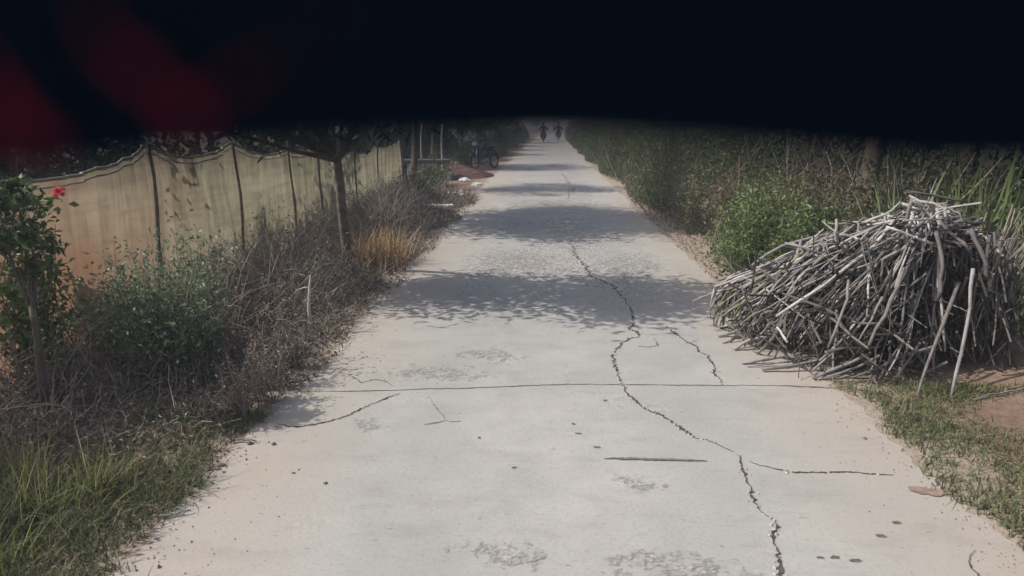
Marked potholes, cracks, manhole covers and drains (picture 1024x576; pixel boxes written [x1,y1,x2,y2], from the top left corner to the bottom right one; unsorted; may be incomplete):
crack [569,241,894,576]
